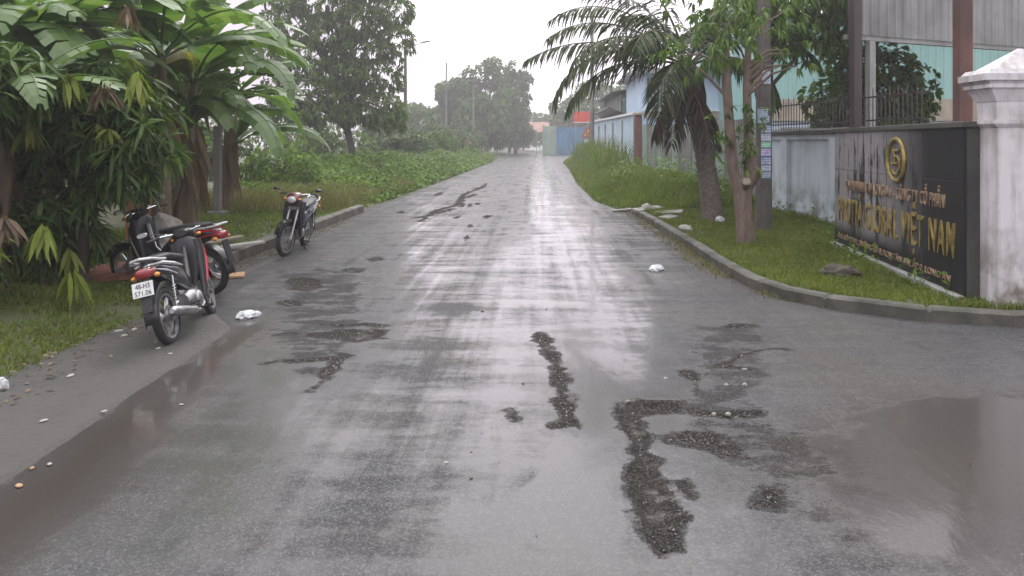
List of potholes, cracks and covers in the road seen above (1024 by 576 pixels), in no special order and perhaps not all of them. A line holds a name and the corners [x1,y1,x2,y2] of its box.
pothole [653,427,769,464]
pothole [291,328,395,344]
pothole [737,479,806,516]
pothole [671,471,715,506]
pothole [488,402,530,426]
pothole [294,350,365,395]
pothole [278,276,329,294]
pothole [599,395,707,569]
